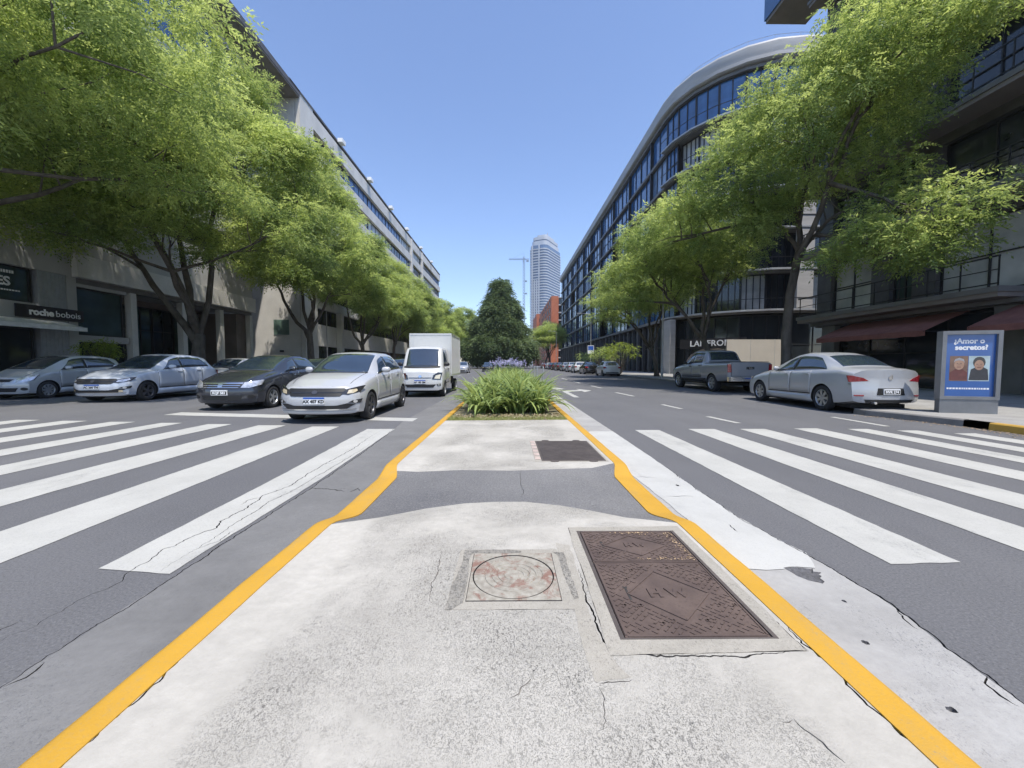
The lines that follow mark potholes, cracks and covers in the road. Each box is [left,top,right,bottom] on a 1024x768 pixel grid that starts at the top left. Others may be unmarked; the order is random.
manhole cover [556,526,806,682]
pothole [785,567,825,584]
manhole cover [530,440,609,462]
crack [580,574,903,762]
manhole cover [445,549,579,610]
